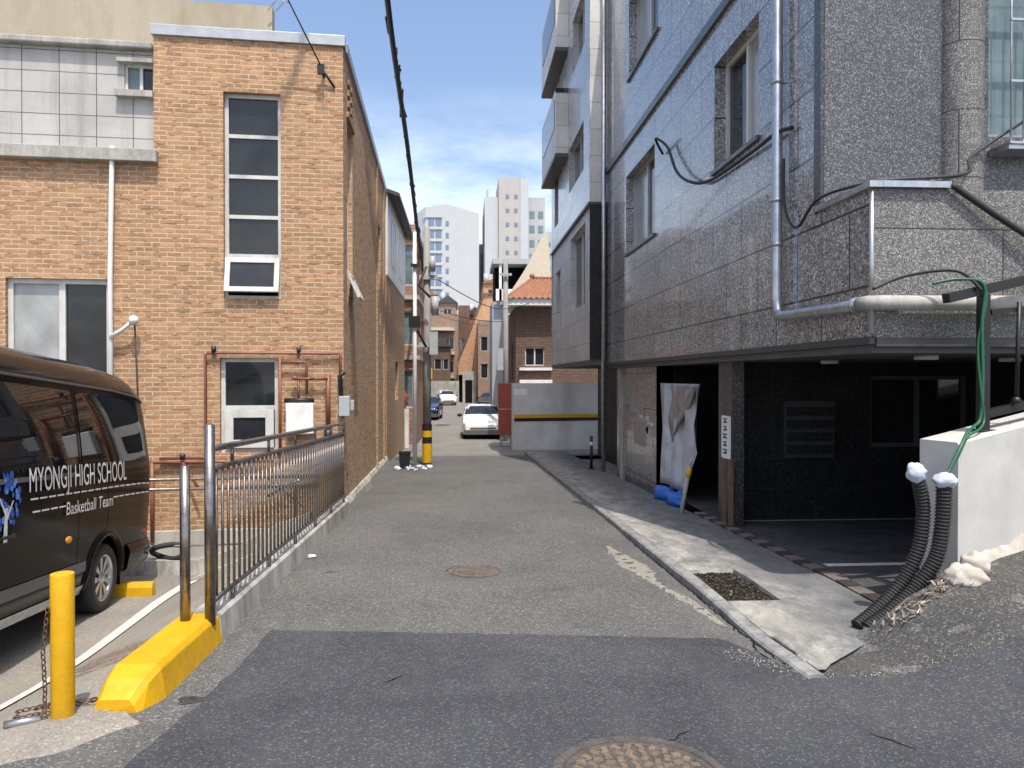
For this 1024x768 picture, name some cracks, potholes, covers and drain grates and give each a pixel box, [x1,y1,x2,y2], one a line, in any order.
manhole cover [553,736,724,768]
manhole cover [449,565,502,577]
